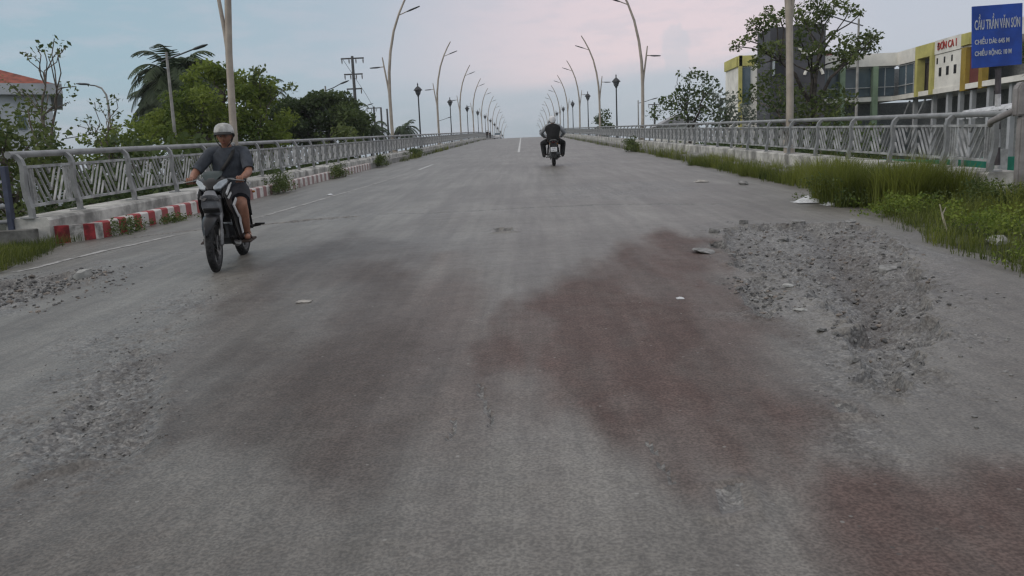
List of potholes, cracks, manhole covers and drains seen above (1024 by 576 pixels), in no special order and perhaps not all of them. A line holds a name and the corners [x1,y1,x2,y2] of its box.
crack [476,383,494,427]
pothole [715,482,745,514]
pothole [20,348,186,477]
crack [645,442,676,485]
pothole [709,220,963,397]
pothole [0,269,112,308]
crack [445,420,457,441]
